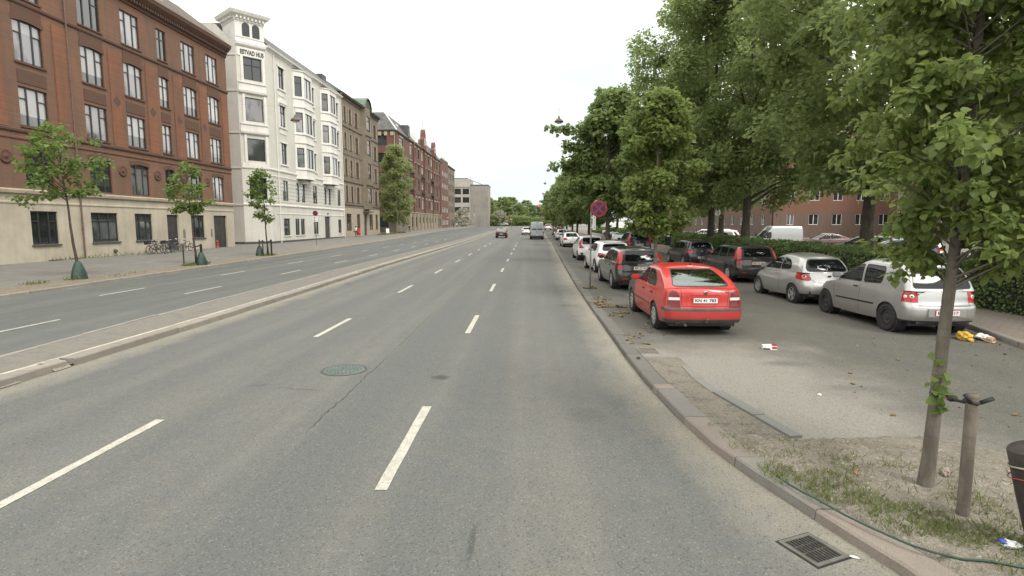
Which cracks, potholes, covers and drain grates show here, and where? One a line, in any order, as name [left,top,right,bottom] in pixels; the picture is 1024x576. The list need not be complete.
drain grate [775,532,852,569]
manhole cover [321,364,367,376]
crack [306,318,428,433]
